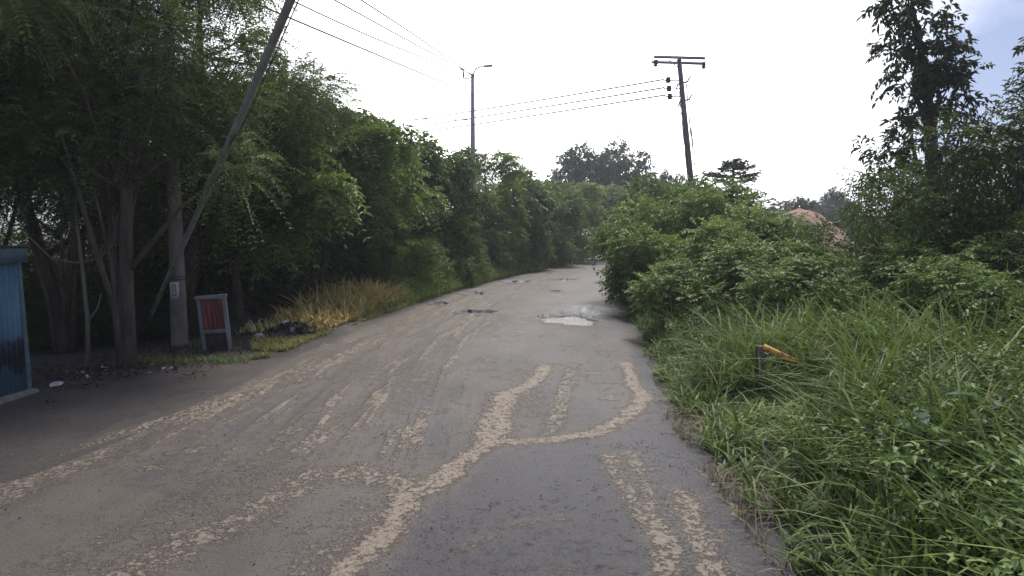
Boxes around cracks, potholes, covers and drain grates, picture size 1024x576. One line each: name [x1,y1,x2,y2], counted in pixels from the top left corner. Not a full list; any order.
pothole [534,313,604,327]
